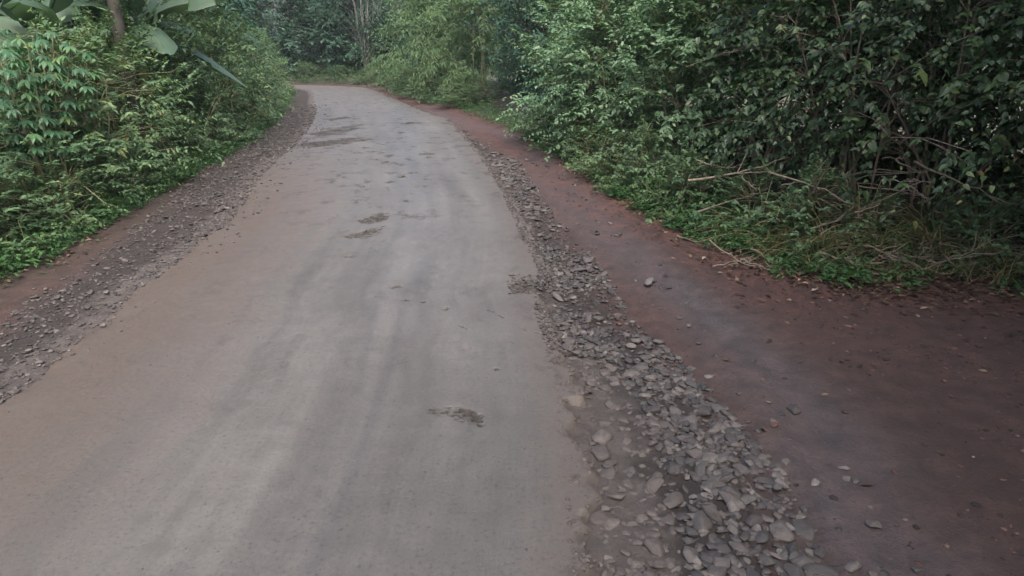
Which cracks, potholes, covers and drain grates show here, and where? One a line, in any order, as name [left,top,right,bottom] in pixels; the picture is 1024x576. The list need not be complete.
pothole [421,399,491,432]
pothole [291,135,379,149]
pothole [351,212,395,225]
pothole [303,123,369,139]
pothole [504,273,552,300]
pothole [335,225,390,241]
